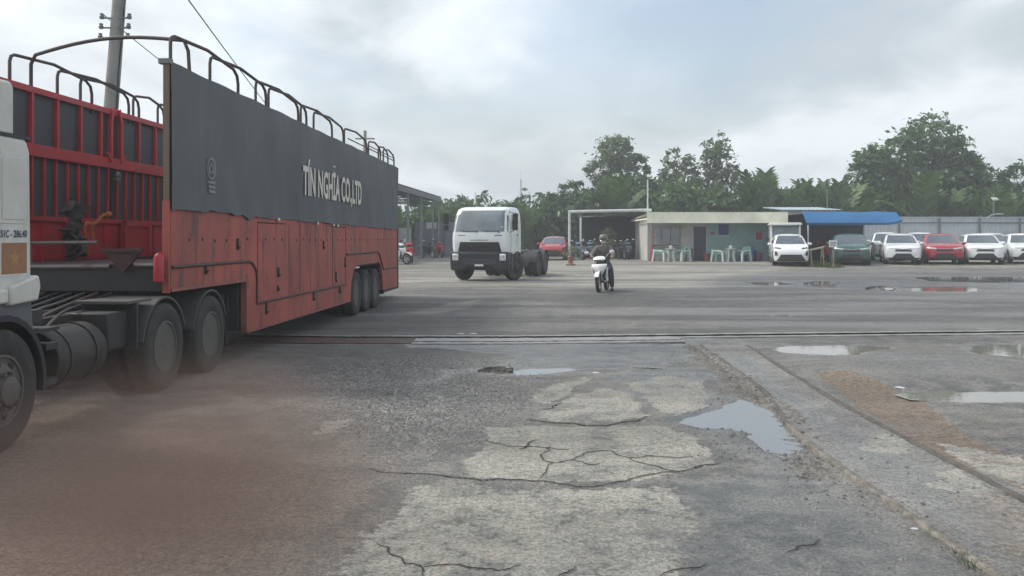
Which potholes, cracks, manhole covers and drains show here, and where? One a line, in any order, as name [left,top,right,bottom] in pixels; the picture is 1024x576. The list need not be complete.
pothole [479,366,513,374]
crack [377,542,518,575]
crack [369,440,718,487]
crack [525,402,648,426]
